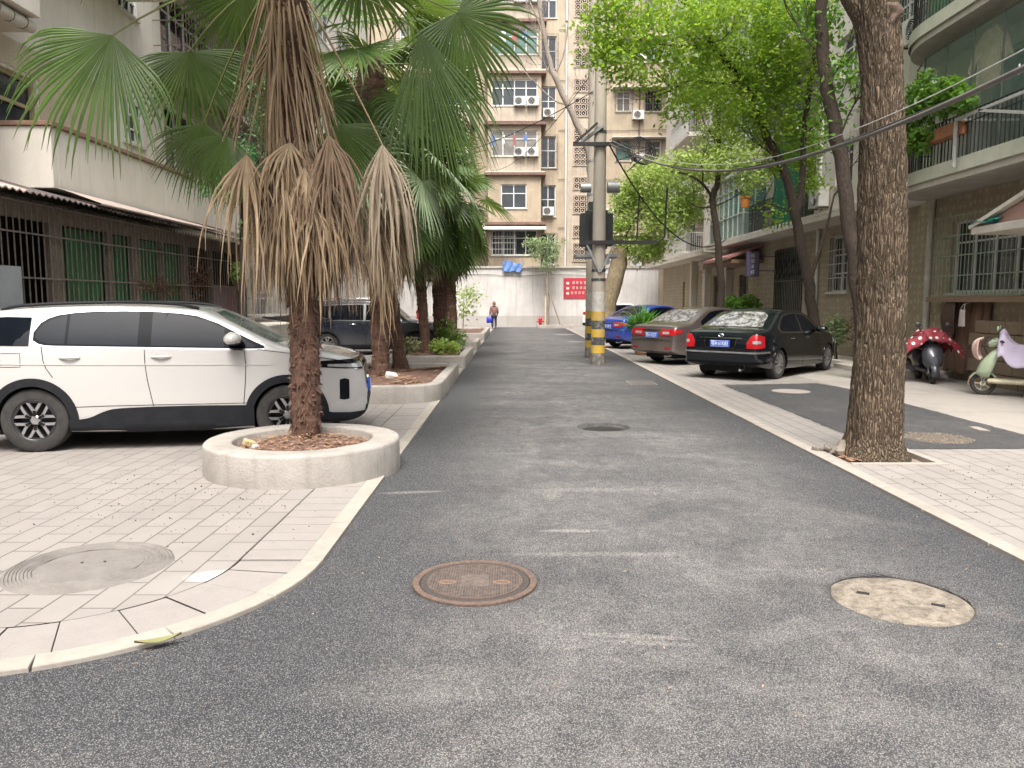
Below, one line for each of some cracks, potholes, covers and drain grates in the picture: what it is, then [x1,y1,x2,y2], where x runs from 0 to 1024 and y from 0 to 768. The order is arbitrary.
manhole cover [823,572,983,628]
manhole cover [904,432,976,444]
manhole cover [578,423,630,431]
manhole cover [409,559,541,607]
manhole cover [0,541,175,595]
